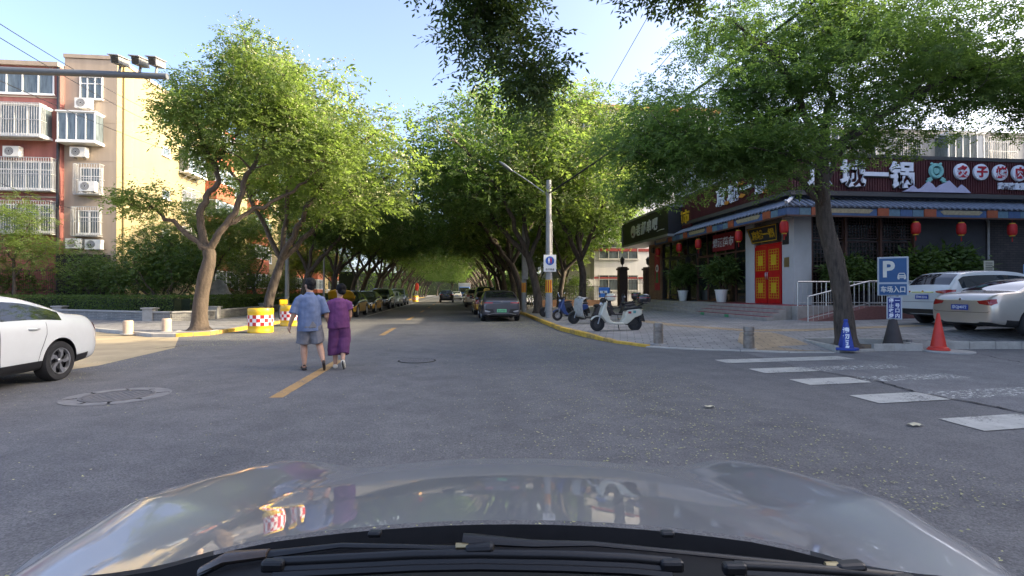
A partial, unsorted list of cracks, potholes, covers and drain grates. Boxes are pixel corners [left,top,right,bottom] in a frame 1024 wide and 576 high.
manhole cover [57,387,172,406]
